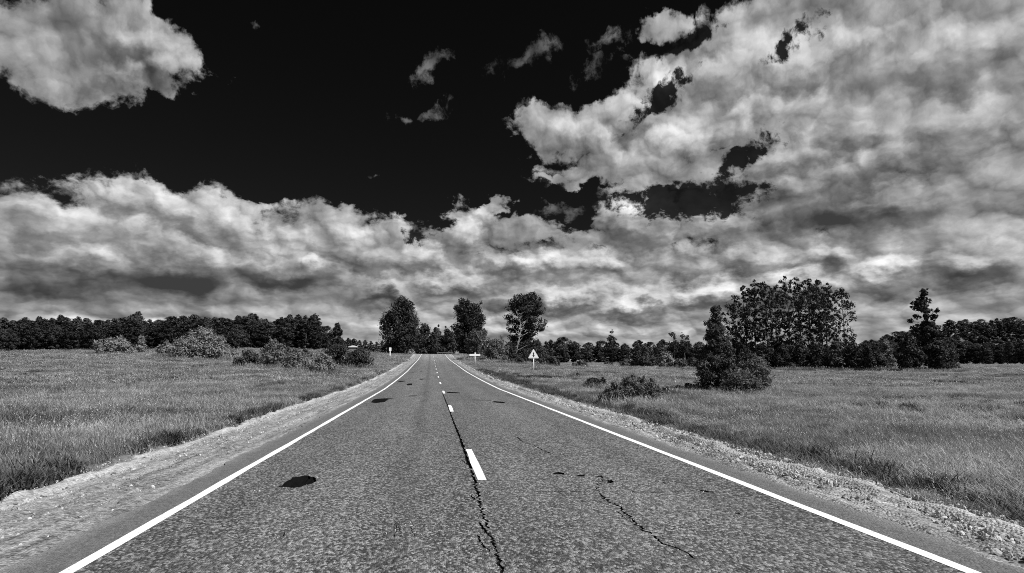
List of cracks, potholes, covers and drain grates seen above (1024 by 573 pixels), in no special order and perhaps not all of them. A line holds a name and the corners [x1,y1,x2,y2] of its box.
crack [462,460,504,573]
pothole [277,475,316,488]
crack [527,479,695,559]
